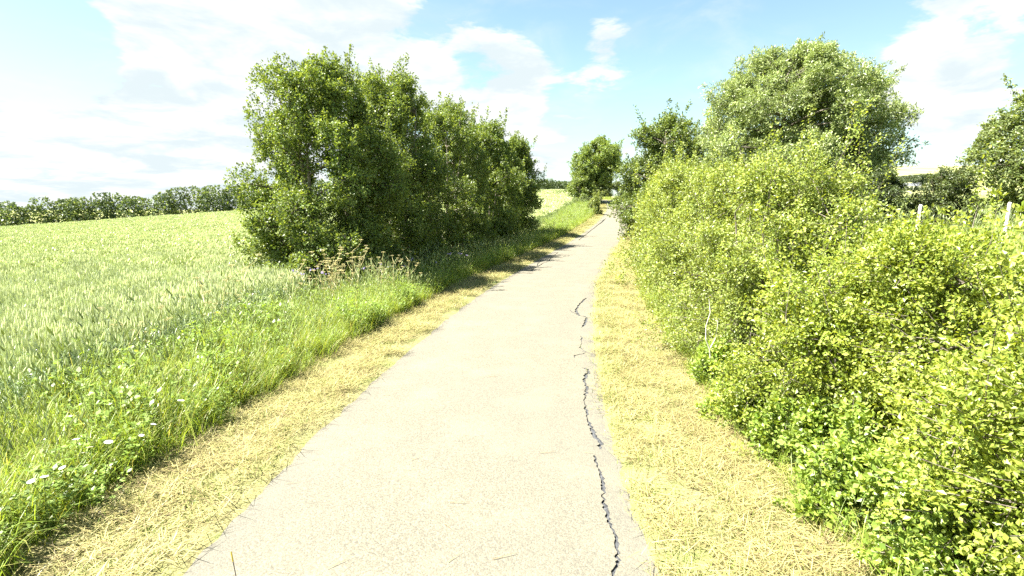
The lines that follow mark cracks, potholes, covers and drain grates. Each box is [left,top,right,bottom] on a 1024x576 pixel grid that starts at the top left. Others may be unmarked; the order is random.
crack [570,298,622,576]
